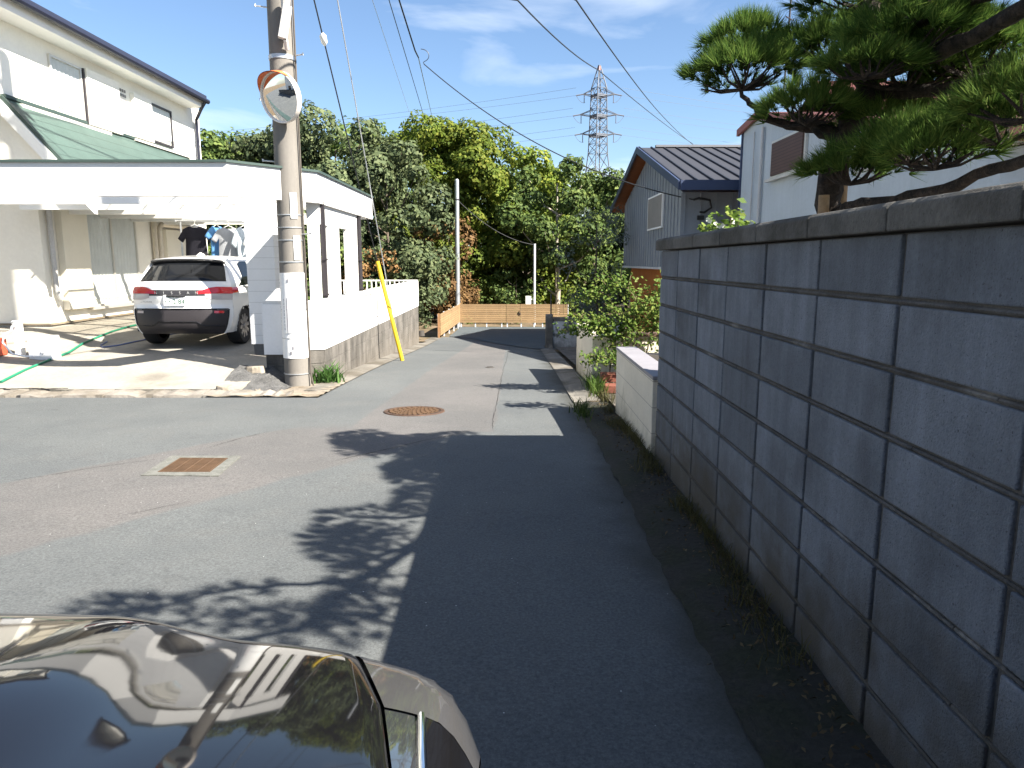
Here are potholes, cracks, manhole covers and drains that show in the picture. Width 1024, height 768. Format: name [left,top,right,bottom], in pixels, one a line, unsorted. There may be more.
drain grate [141,455,241,477]
manhole cover [383,406,445,416]
